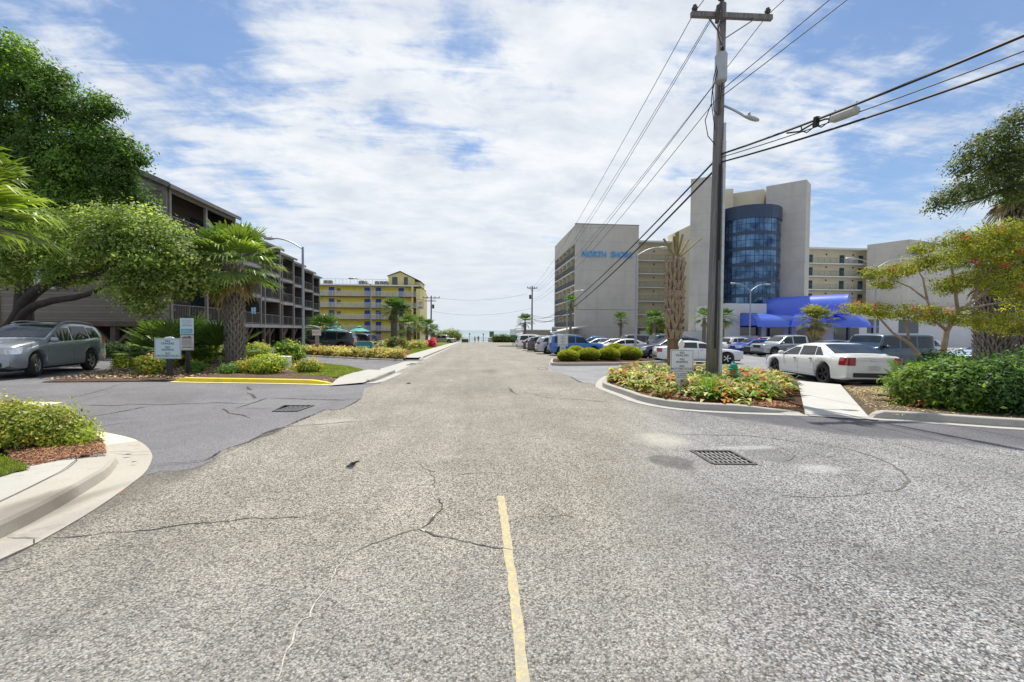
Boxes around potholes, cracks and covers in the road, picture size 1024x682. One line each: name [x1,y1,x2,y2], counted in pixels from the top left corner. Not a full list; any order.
crack [67,384,361,474]
crack [1,515,318,574]
crack [277,464,512,681]
drain grate [690,450,758,465]
